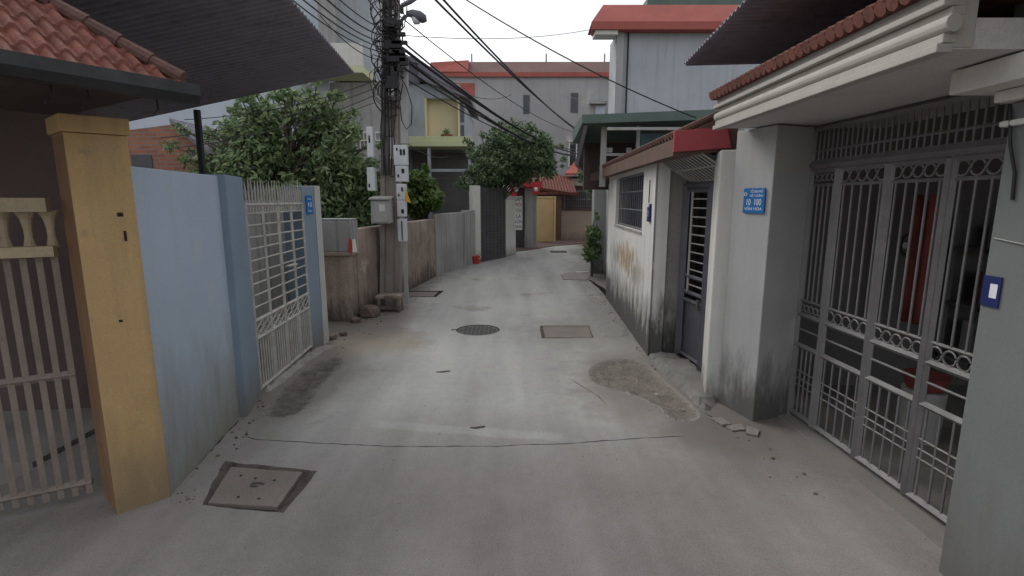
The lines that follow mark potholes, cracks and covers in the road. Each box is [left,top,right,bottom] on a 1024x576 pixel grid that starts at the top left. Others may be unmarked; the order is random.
crack [246,436,680,447]
manhole cover [540,326,593,338]
manhole cover [451,325,500,336]
manhole cover [202,461,317,513]
